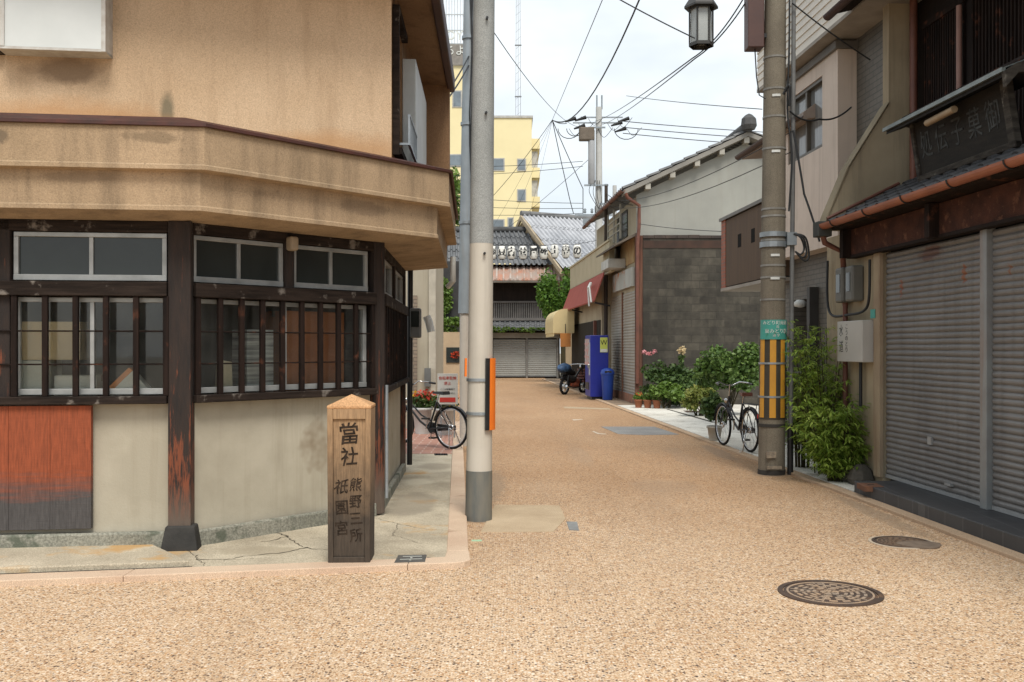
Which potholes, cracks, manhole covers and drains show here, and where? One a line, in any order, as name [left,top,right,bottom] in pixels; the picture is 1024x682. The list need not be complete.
manhole cover [778,580,884,607]
crack [189,533,326,565]
manhole cover [868,536,933,549]
